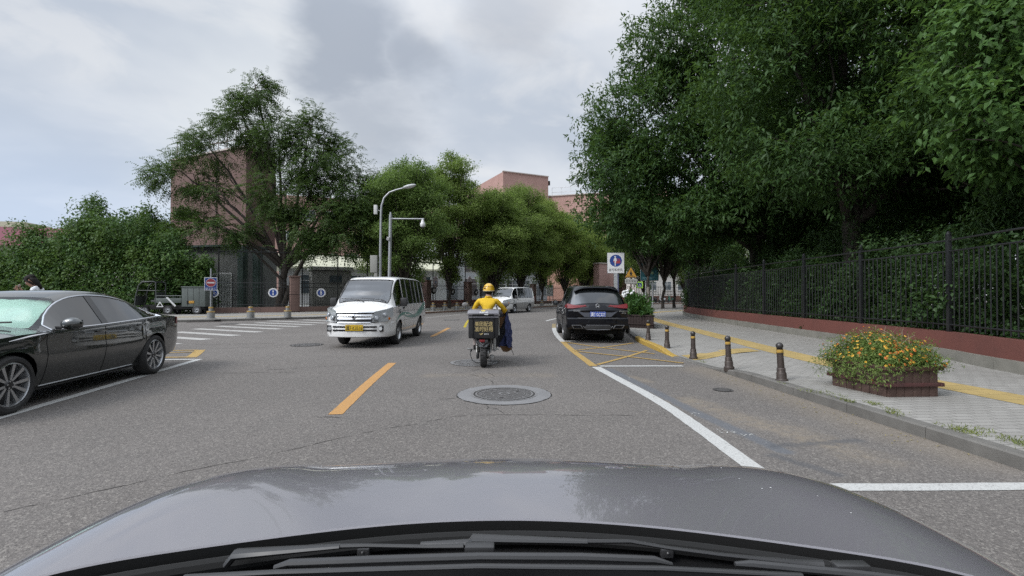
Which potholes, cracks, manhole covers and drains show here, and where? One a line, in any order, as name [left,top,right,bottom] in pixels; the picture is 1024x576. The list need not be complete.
manhole cover [457,385,552,405]
